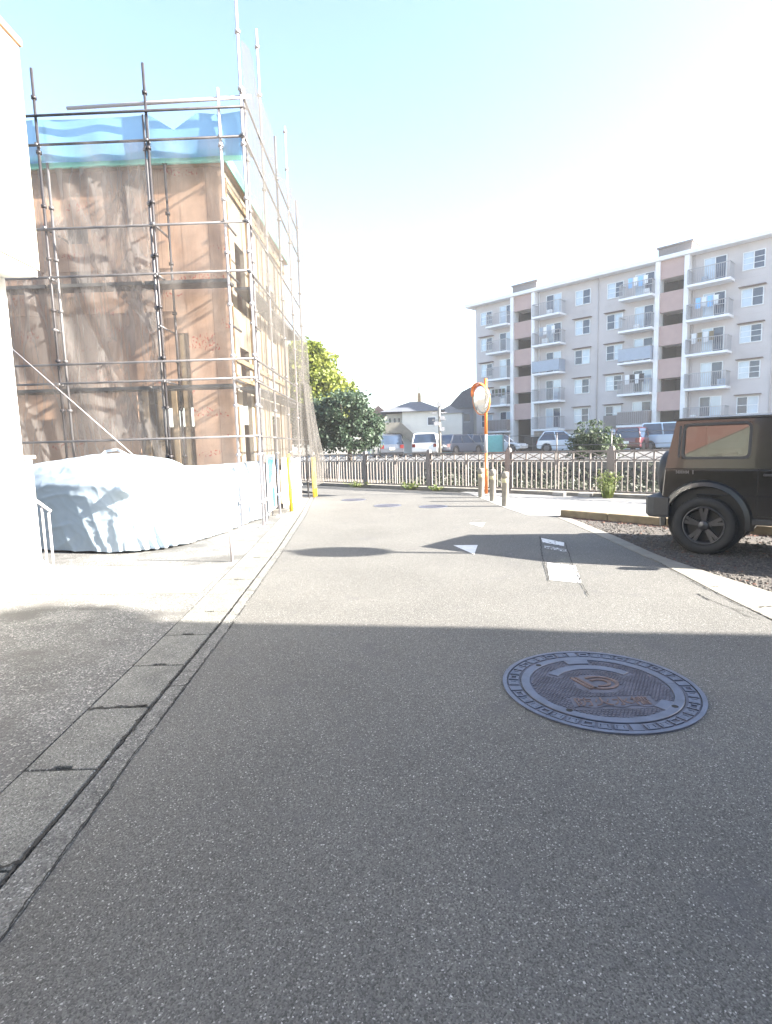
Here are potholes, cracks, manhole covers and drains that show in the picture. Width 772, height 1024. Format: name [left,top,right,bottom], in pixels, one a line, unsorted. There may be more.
manhole cover [503,651,708,735]
